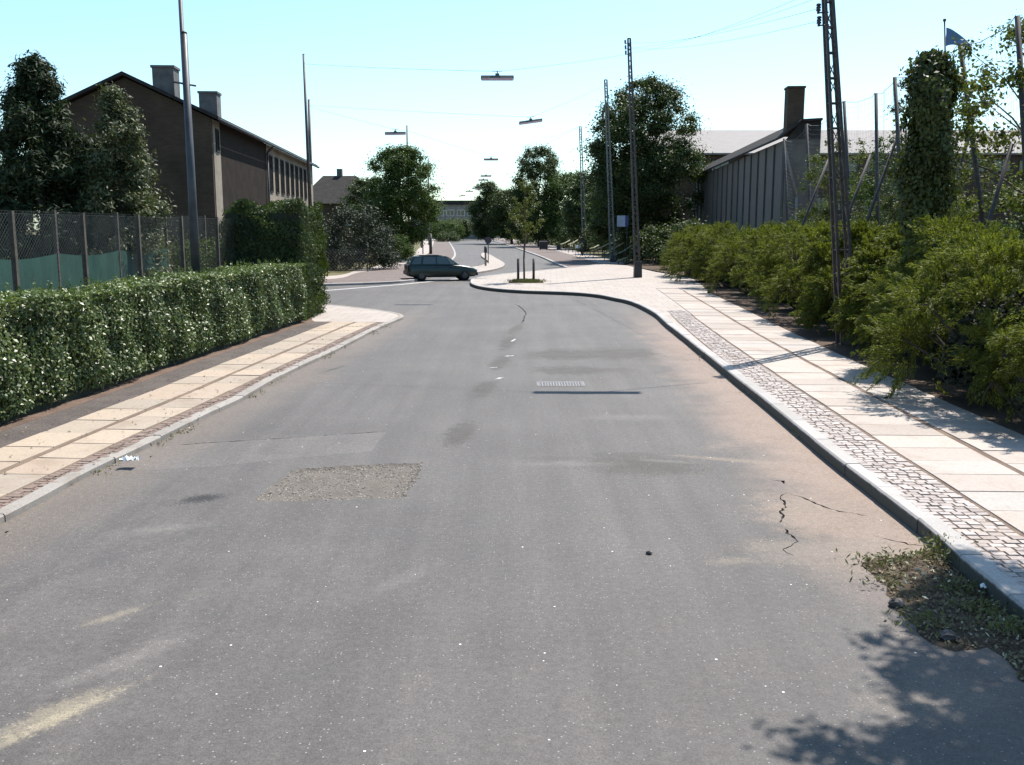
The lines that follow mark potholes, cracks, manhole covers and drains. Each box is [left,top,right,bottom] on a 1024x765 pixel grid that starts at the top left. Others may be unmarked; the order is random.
crack [774,480,866,555]
